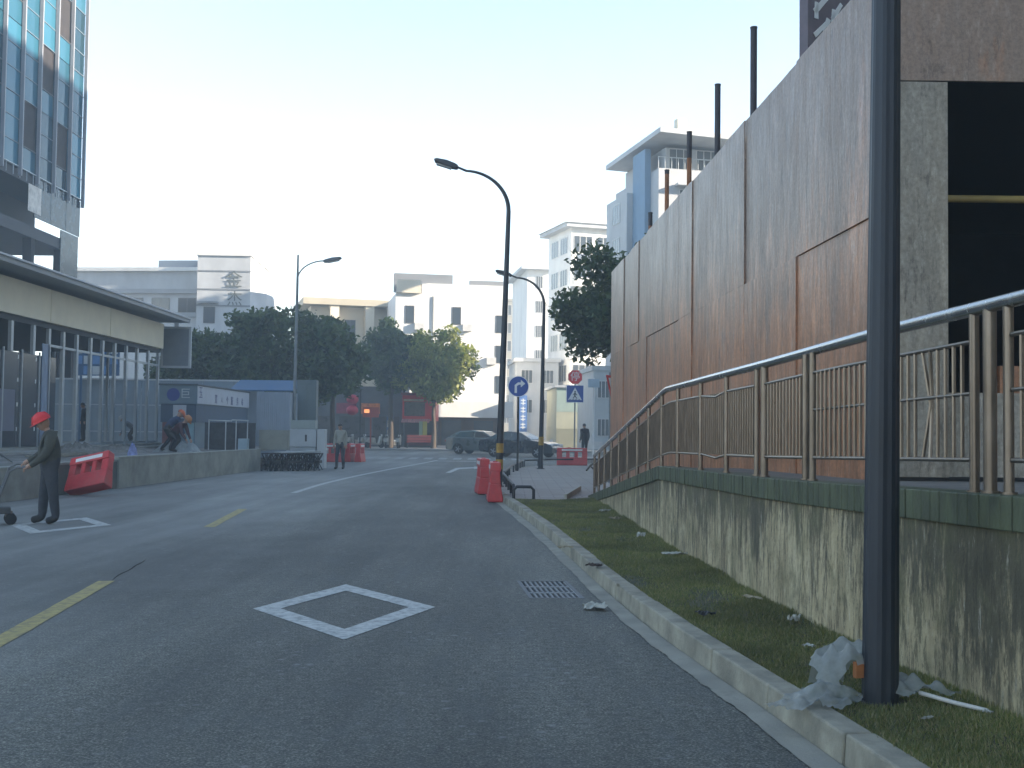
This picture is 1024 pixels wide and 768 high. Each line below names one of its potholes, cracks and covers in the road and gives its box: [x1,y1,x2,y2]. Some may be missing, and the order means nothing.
drain grate [517,581,584,599]
